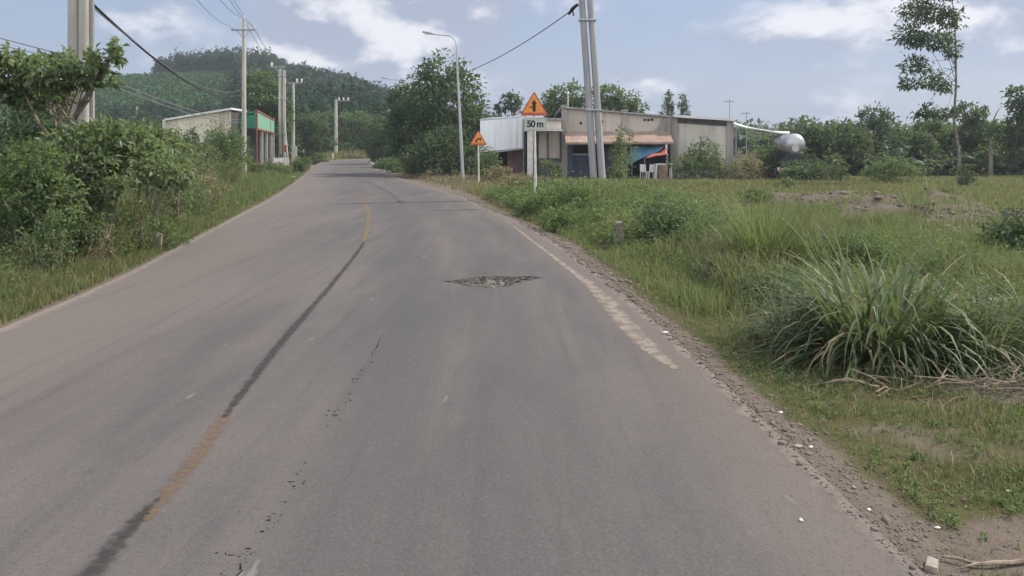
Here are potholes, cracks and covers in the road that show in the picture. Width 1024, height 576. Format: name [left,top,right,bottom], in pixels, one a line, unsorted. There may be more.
crack [214,462,306,576]
pothole [443,273,554,288]
